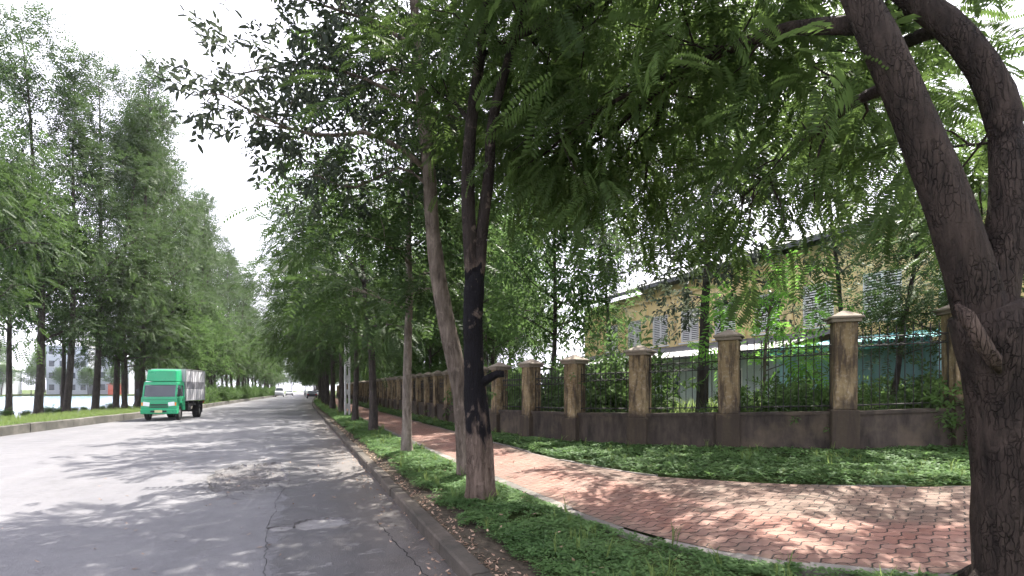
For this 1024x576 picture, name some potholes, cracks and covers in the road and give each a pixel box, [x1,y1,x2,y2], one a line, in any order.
crack [193,459,296,576]
crack [377,522,428,576]
